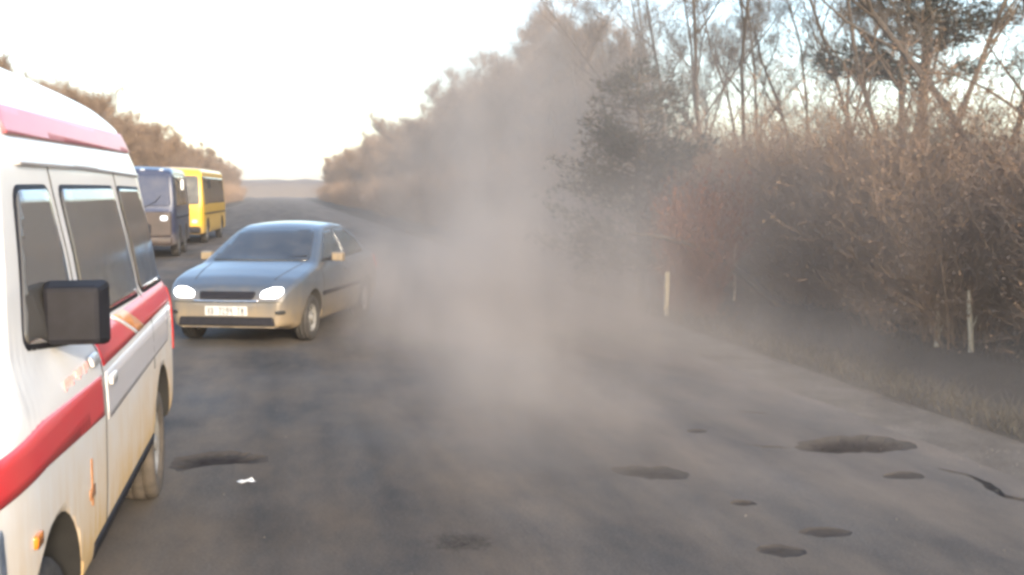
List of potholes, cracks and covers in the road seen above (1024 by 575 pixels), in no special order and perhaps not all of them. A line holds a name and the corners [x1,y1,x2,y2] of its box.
pothole [794,434,918,454]
pothole [611,465,690,480]
pothole [756,544,807,558]
pothole [169,450,269,471]
crack [938,468,1024,501]
pothole [882,471,925,479]
pothole [799,527,853,538]
